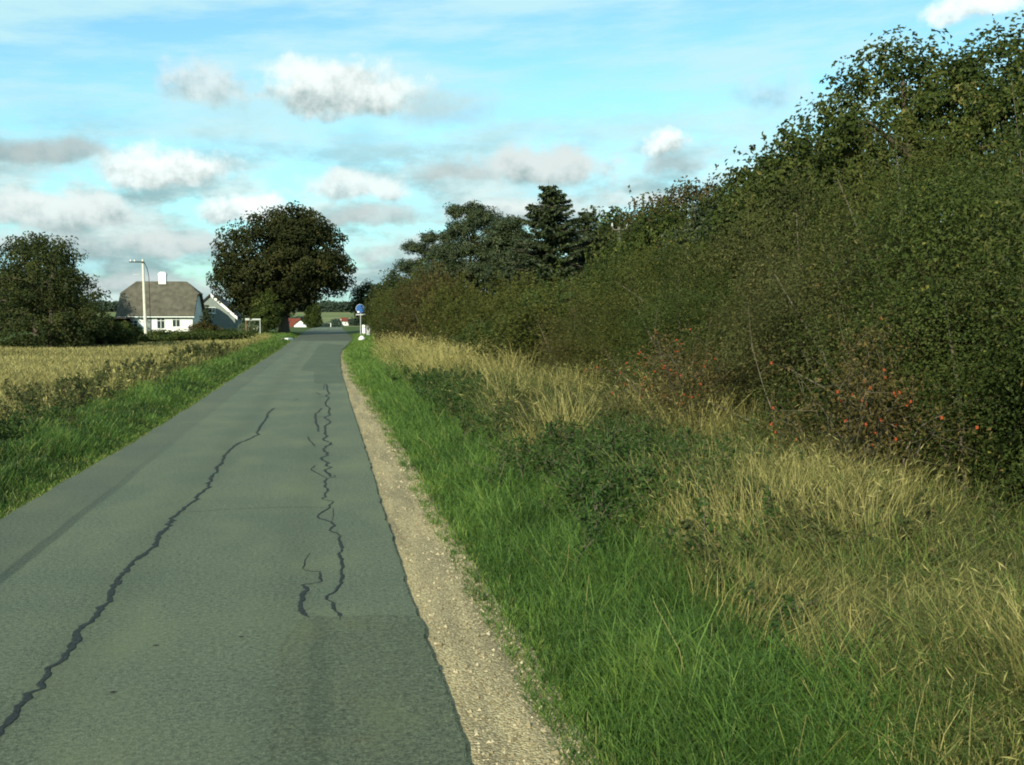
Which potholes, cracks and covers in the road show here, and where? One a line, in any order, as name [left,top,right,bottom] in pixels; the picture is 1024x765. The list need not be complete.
crack [0,384,345,736]
